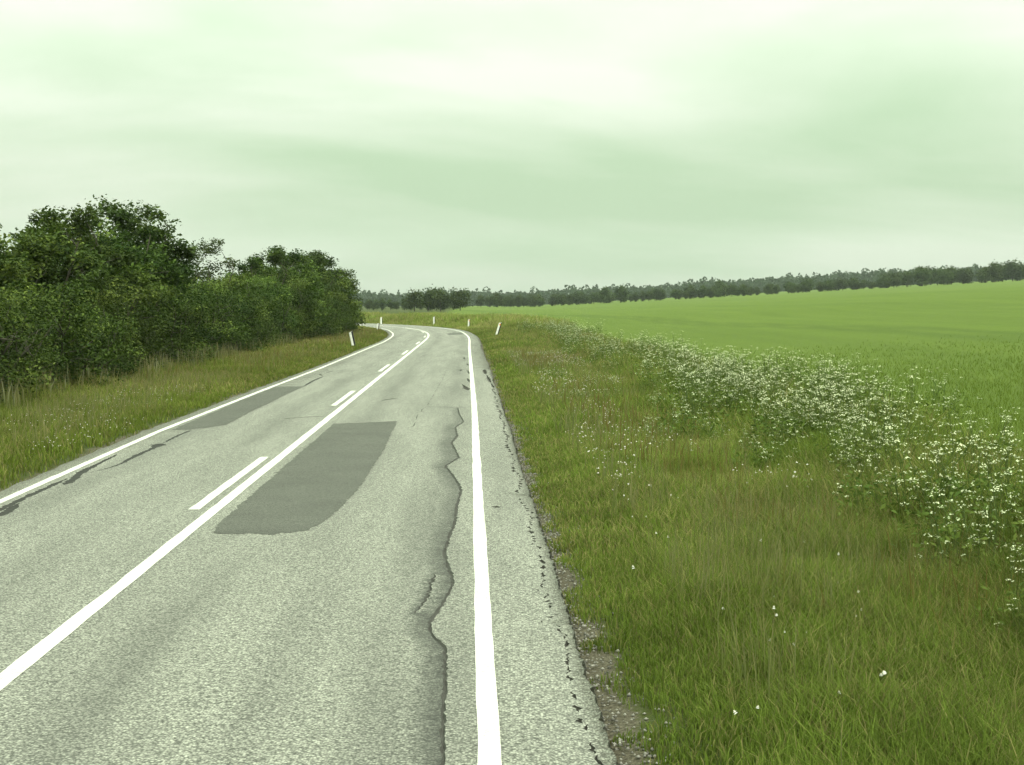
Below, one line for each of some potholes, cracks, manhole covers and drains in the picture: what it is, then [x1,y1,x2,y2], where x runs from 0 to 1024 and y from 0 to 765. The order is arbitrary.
crack [492,388,603,765]
crack [413,354,470,765]
